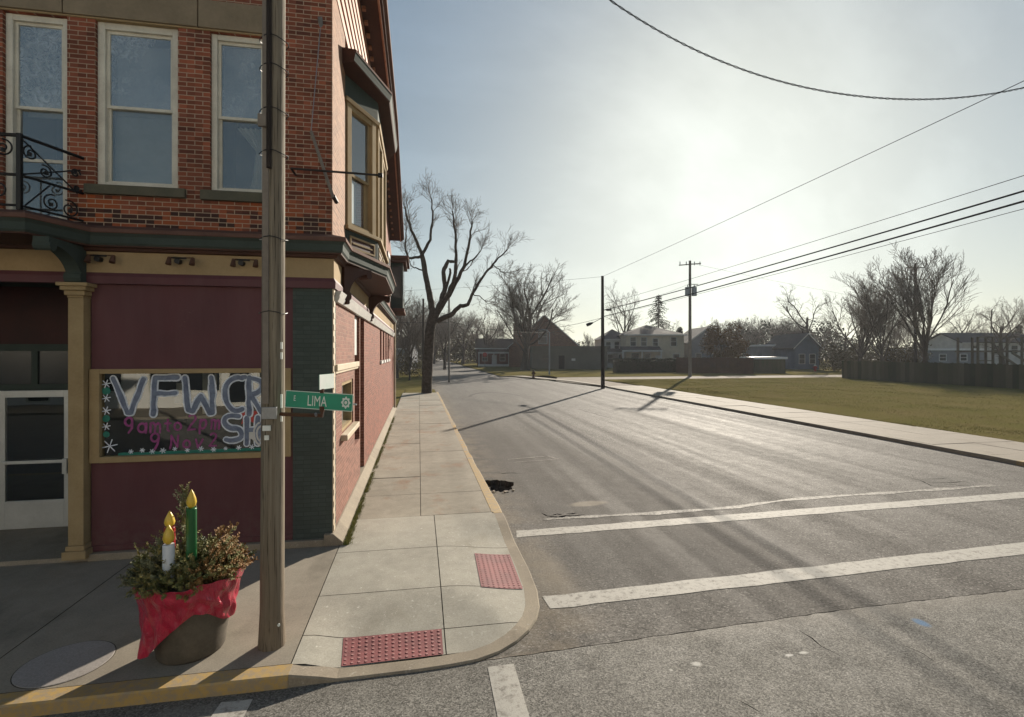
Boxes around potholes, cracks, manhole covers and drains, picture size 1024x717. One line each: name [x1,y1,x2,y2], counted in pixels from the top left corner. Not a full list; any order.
manhole cover [10,640,117,689]
pothole [485,480,515,493]
